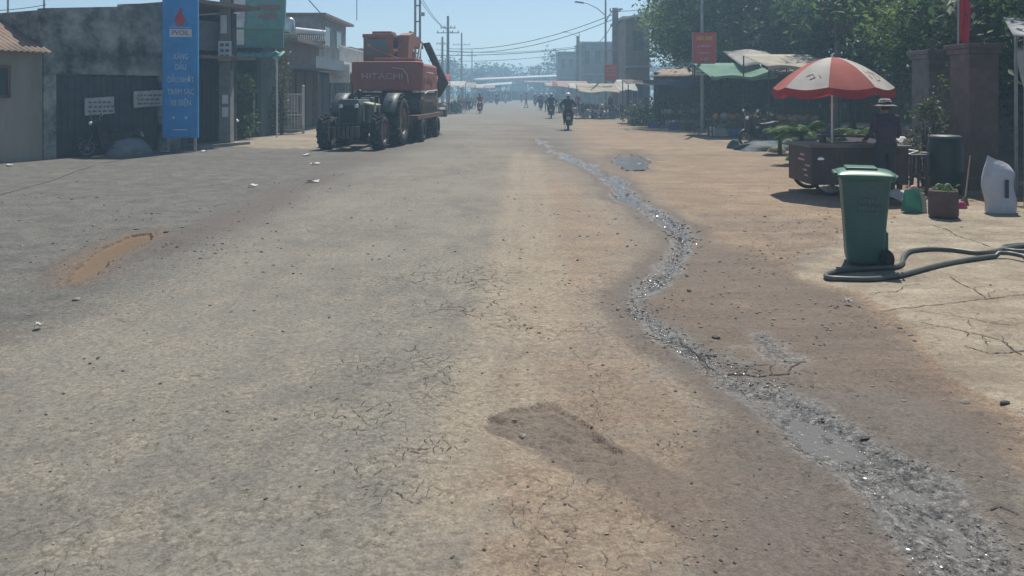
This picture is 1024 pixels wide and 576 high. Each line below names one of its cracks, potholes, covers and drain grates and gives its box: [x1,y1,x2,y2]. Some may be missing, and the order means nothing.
crack [869,276,1024,355]
crack [299,247,516,506]
pothole [63,232,157,283]
